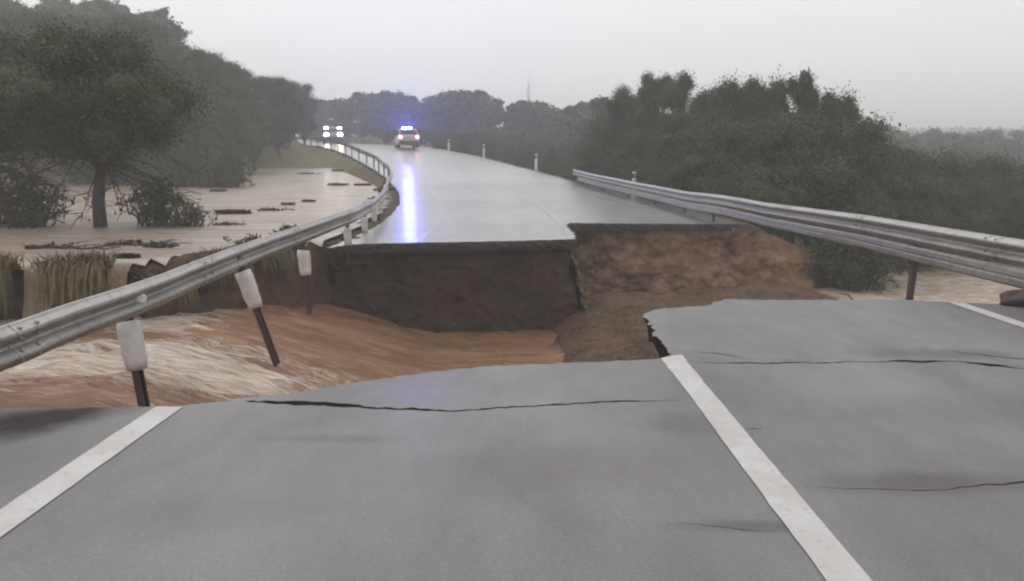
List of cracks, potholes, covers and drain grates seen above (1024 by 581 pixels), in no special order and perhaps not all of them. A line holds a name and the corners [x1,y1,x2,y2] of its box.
crack [804,481,1024,491]
crack [700,350,1024,369]
crack [246,400,672,412]
